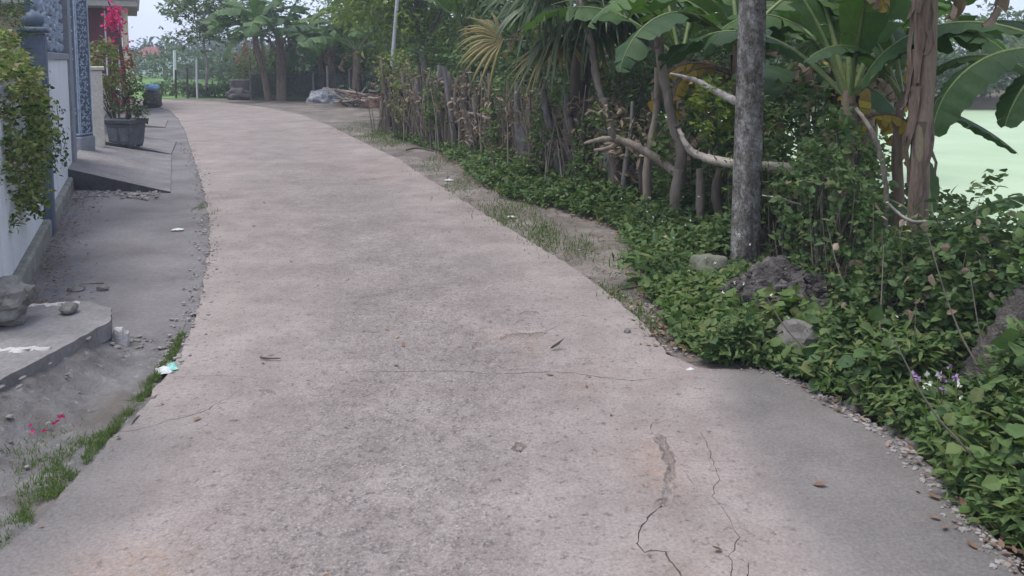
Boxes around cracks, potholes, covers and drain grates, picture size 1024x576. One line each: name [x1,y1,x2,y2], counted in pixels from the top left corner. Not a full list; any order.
crack [362,358,653,381]
crack [113,398,231,434]
crack [636,417,682,576]
crack [689,432,749,576]
